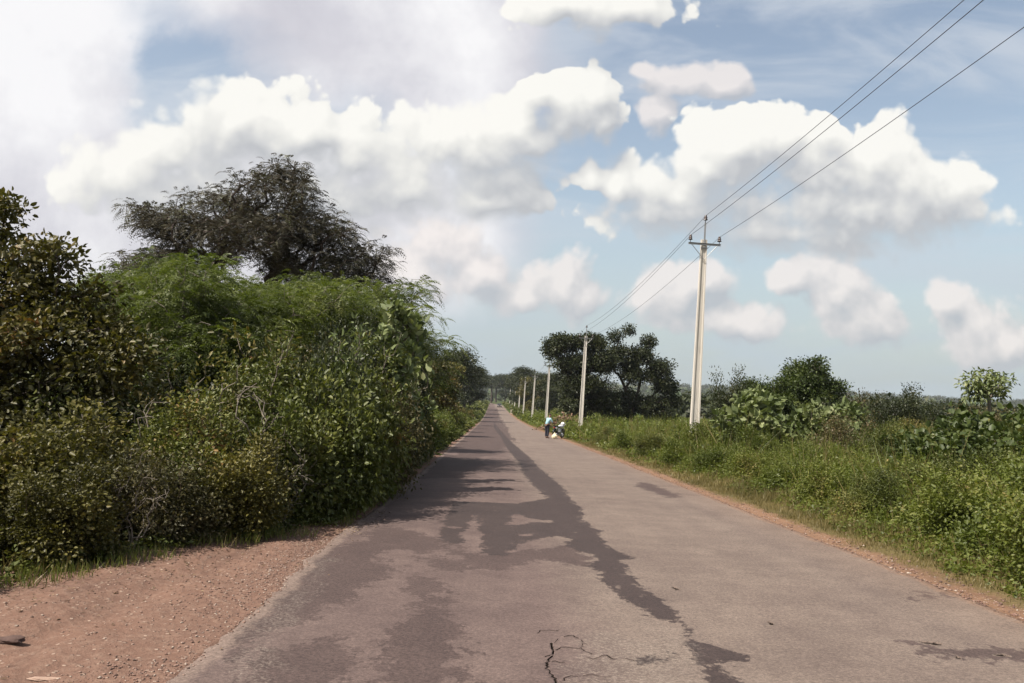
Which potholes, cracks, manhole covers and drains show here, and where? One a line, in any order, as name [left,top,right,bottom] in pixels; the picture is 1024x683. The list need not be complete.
crack [537,630,634,683]
